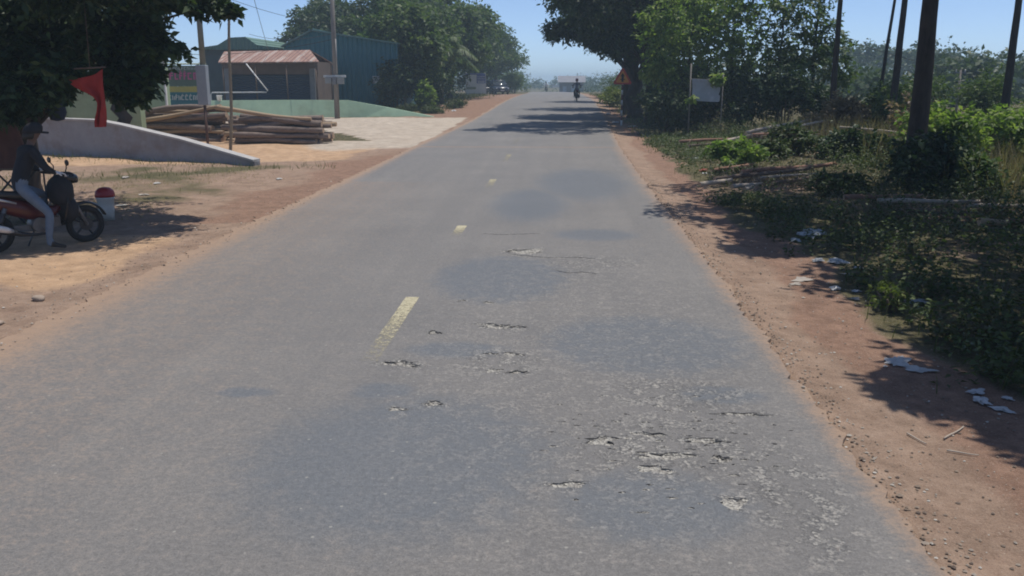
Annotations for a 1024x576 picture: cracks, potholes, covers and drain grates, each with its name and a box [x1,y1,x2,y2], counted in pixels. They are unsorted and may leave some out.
pothole [637,465,676,474]
crack [540,389,824,513]
pothole [638,451,700,460]
pothole [720,497,749,510]
crack [513,254,595,274]
pothole [585,435,620,446]
pothole [381,360,421,368]
